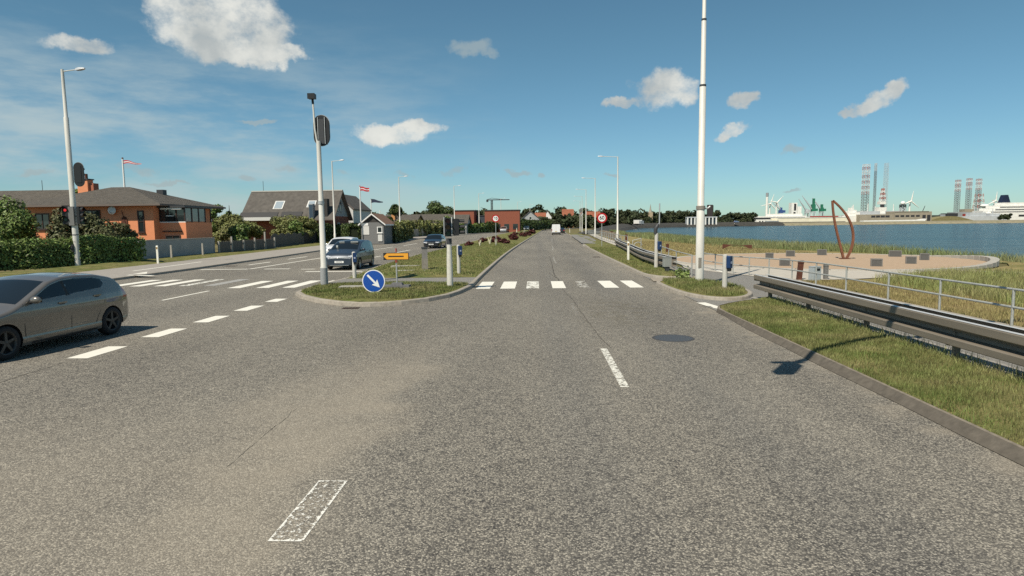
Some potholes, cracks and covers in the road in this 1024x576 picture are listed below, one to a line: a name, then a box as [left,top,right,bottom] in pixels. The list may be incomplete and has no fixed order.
crack [549,256,611,348]
manhole cover [652,334,695,342]
